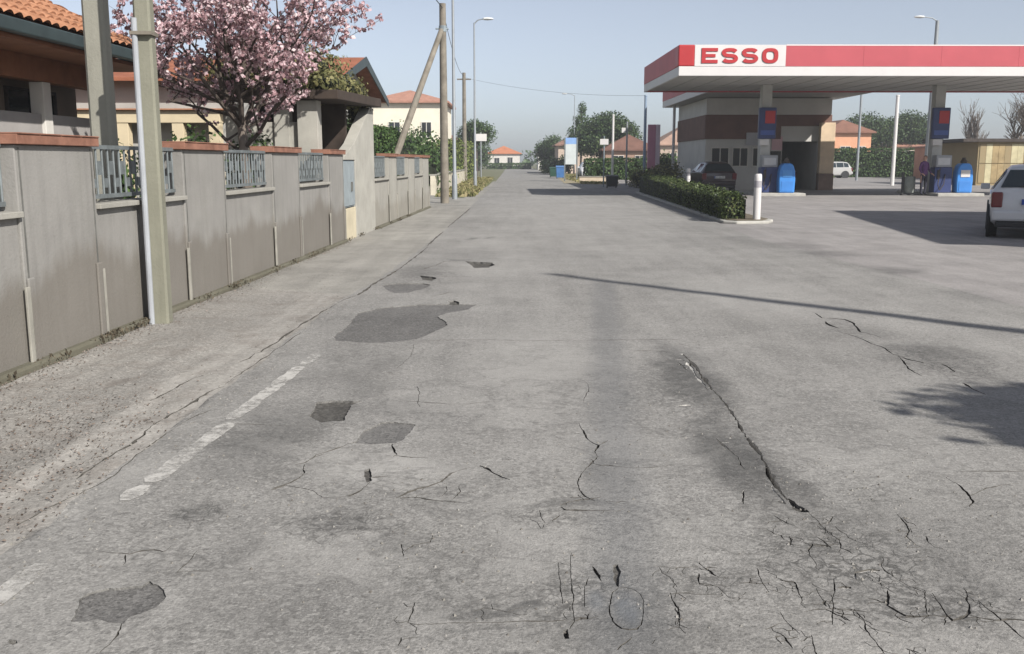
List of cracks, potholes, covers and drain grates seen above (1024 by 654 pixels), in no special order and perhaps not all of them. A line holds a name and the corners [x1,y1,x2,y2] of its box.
crack [393,354,1024,654]
crack [272,443,510,504]
crack [227,301,341,383]
crack [815,313,986,395]
